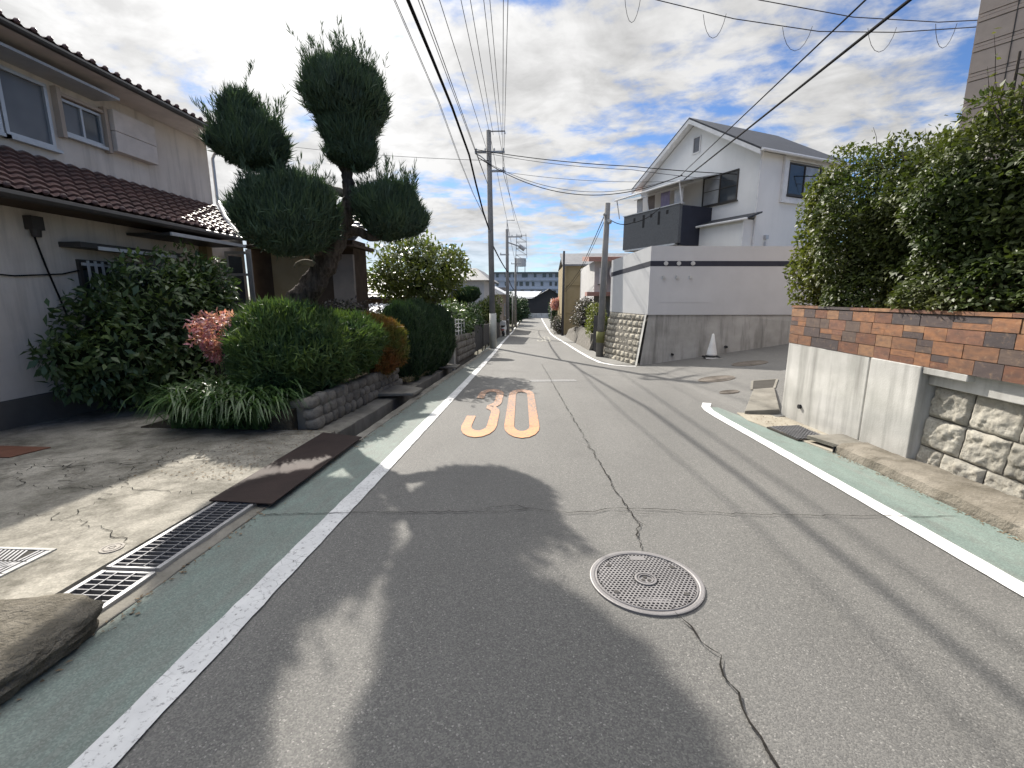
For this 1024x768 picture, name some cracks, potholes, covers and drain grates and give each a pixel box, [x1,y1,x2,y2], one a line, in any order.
drain grate [64,570,157,612]
crack [5,436,280,543]
drain grate [0,547,57,577]
manhole cover [590,551,706,617]
crack [675,612,780,768]
drain grate [767,425,822,441]
drain grate [106,501,257,572]
